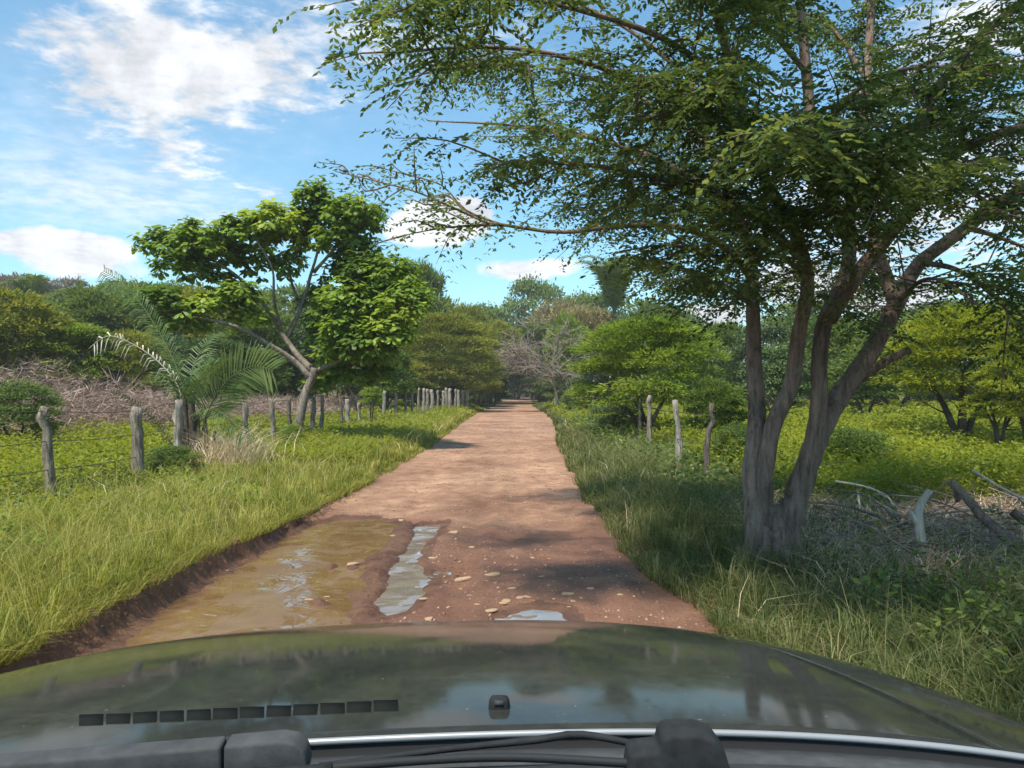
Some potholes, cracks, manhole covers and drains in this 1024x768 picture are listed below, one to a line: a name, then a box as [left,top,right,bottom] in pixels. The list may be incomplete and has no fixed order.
pothole [360,519,452,620]
pothole [90,514,413,653]
pothole [488,599,585,621]
